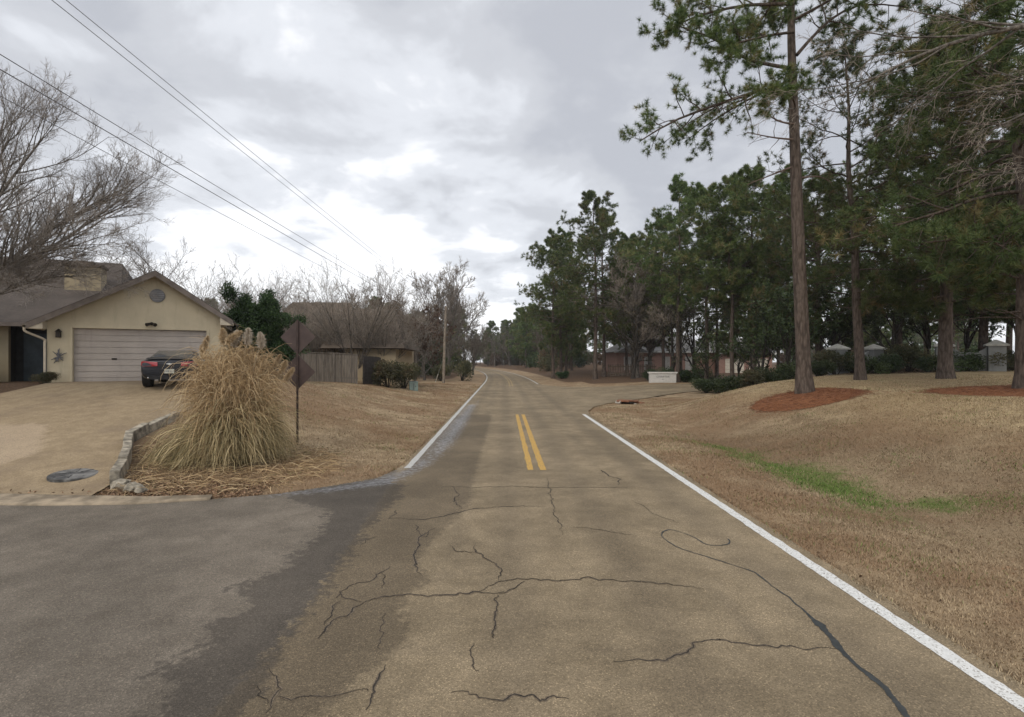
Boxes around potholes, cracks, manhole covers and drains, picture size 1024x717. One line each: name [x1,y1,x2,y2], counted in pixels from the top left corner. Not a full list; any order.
crack [249,470,703,713]
manhole cover [46,468,99,483]
crack [614,638,836,662]
